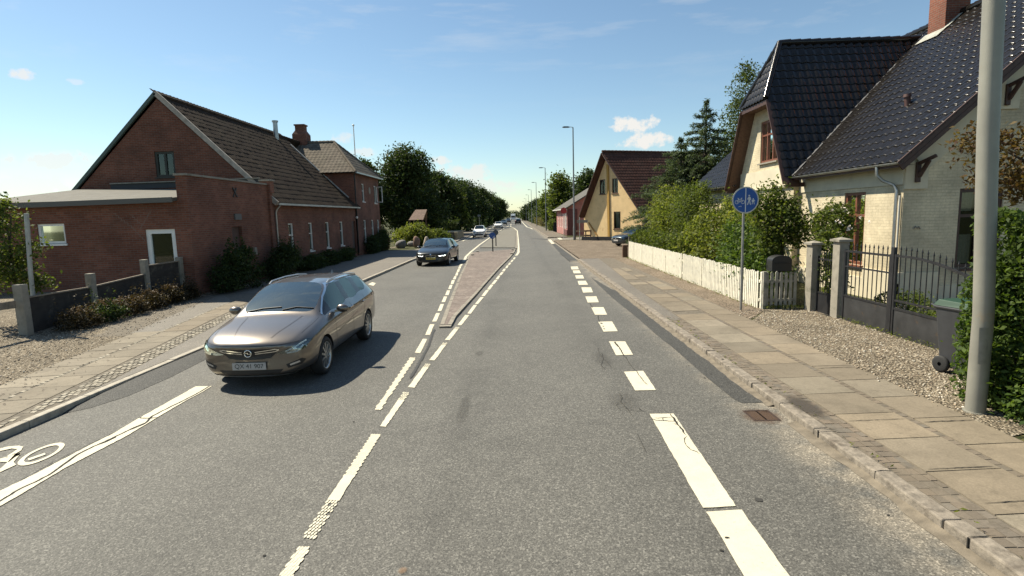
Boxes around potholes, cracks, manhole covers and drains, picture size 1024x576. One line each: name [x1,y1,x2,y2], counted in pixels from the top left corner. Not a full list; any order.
crack [597,342,697,452]
drain grate [742,410,781,421]
